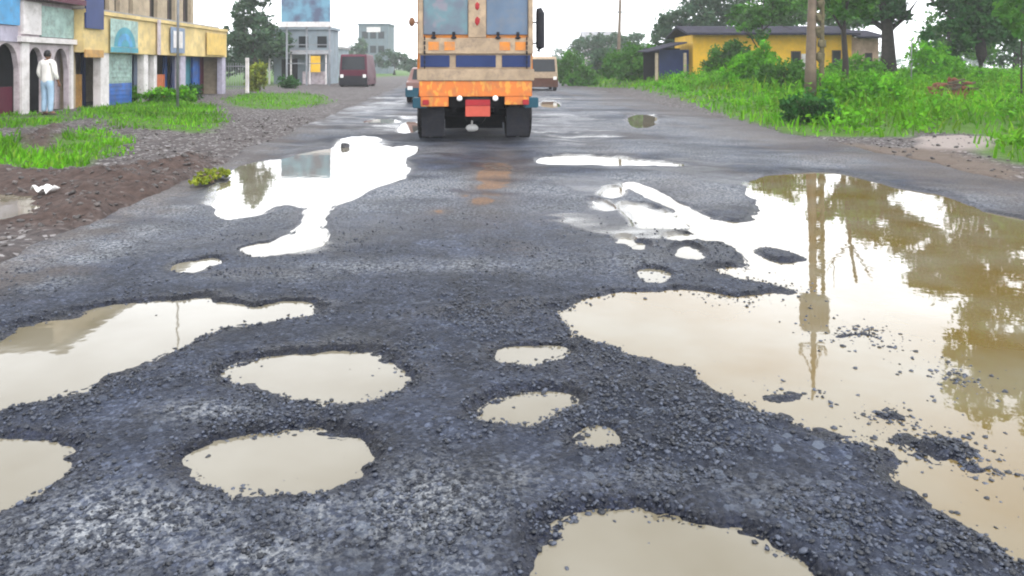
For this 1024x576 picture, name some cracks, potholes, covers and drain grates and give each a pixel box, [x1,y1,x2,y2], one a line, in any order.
pothole [540,168,1024,576]
pothole [0,290,332,411]
pothole [210,342,421,413]
pothole [0,425,92,514]
pothole [489,340,581,367]
pothole [462,379,590,427]
pothole [157,415,387,503]
pothole [200,135,422,258]
